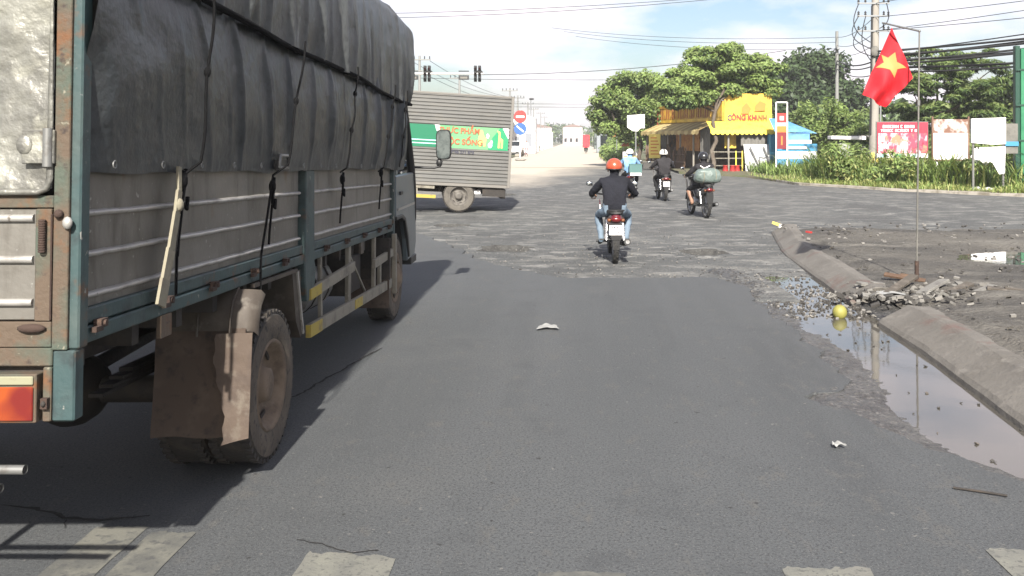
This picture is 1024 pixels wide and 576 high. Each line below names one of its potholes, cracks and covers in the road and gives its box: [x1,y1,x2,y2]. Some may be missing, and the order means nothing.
crack [8,505,150,526]
pothole [674,249,734,258]
crack [296,539,375,553]
crack [291,348,381,398]
